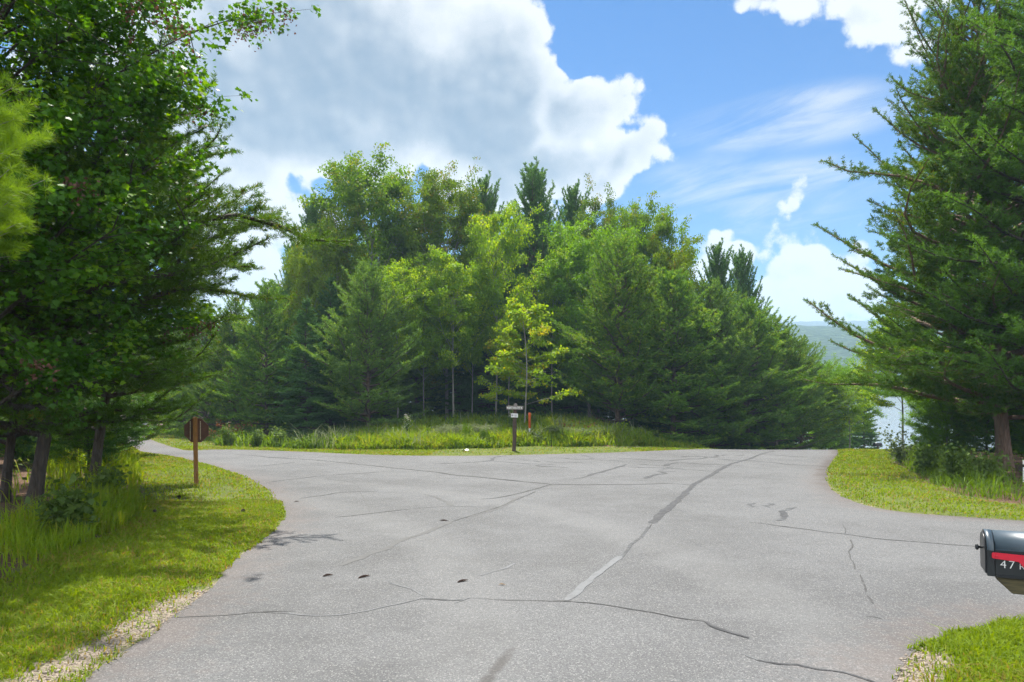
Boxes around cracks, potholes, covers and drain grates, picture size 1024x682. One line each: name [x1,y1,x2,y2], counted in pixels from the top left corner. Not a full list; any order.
crack [235,454,811,517]
crack [183,583,749,638]
crack [747,503,968,619]
